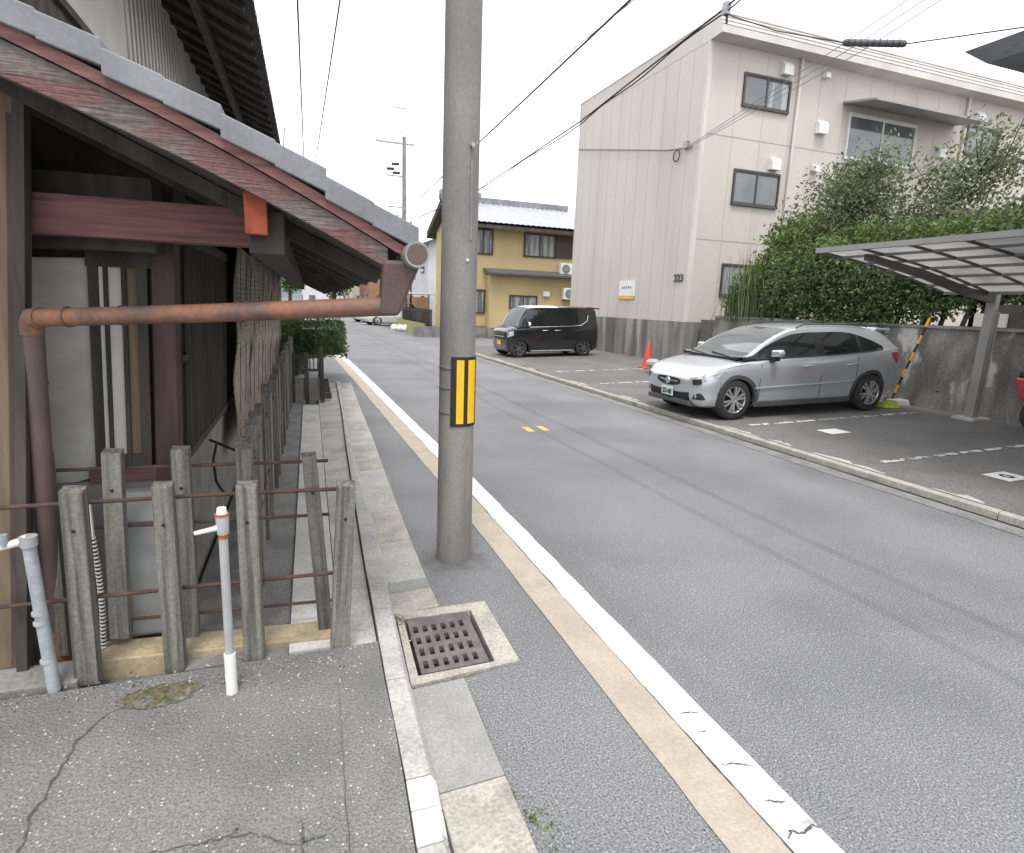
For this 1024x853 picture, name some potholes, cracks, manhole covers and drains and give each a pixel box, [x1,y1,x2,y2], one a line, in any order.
crack [148,819,326,853]
drain grate [396,601,519,689]
crack [16,705,130,853]
crack [626,666,822,853]
